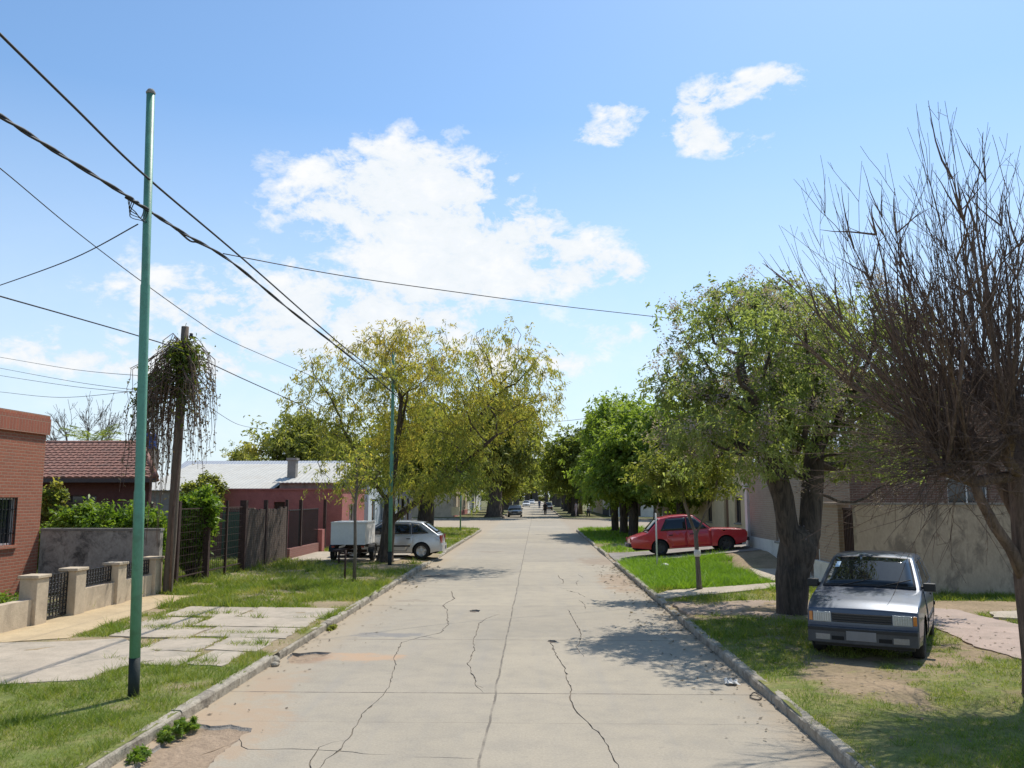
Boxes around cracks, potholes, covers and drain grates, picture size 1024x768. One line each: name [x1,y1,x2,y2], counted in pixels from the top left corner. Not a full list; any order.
crack [467,615,495,692]
pothole [131,724,252,768]
crack [239,591,455,768]
crack [550,575,619,768]
